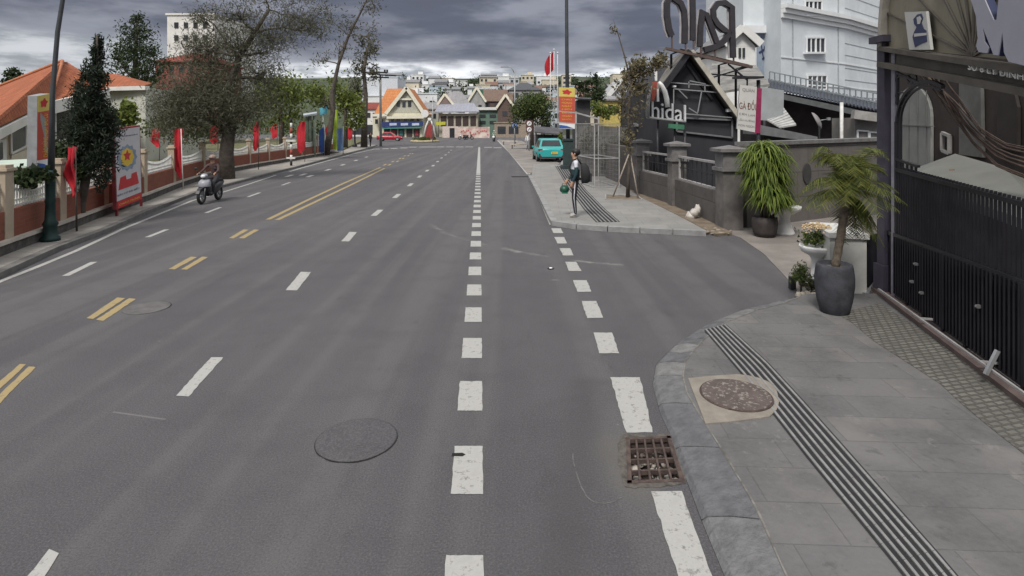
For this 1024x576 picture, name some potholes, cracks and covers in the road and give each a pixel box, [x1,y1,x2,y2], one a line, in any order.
manhole cover [688,374,779,425]
manhole cover [314,418,398,463]
drain grate [617,433,686,488]
manhole cover [121,301,172,315]
crack [572,453,622,504]
